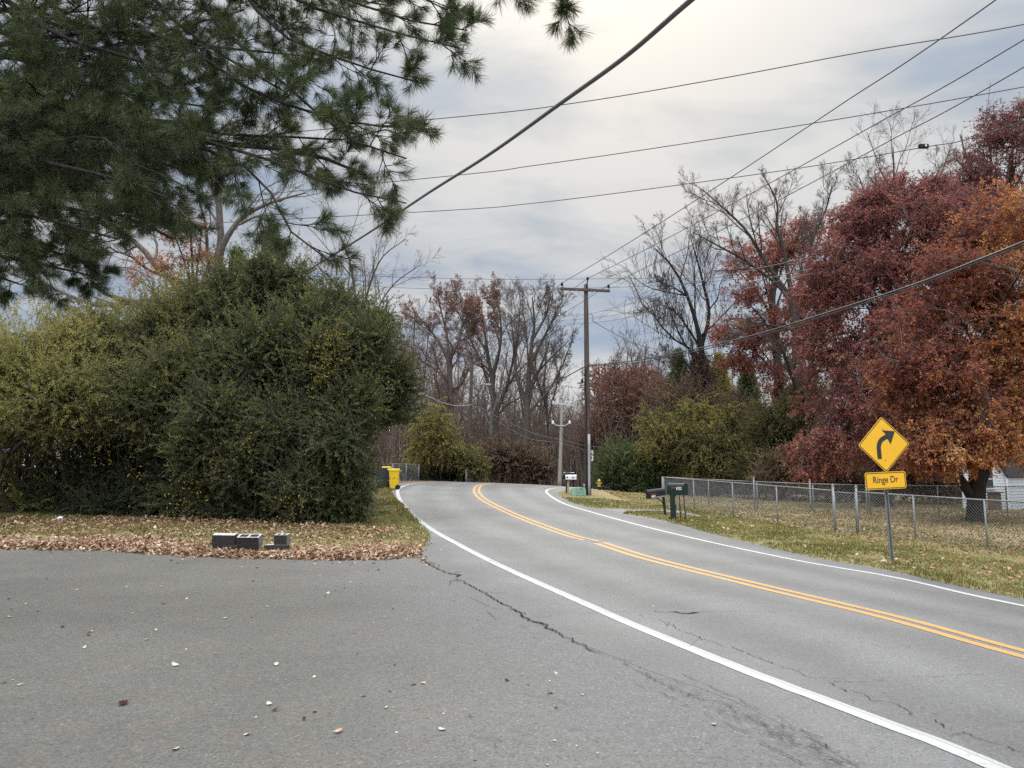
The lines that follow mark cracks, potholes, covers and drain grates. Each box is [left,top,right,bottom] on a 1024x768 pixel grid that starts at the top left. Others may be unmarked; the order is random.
crack [590,610,1020,751]
crack [609,655,866,768]
